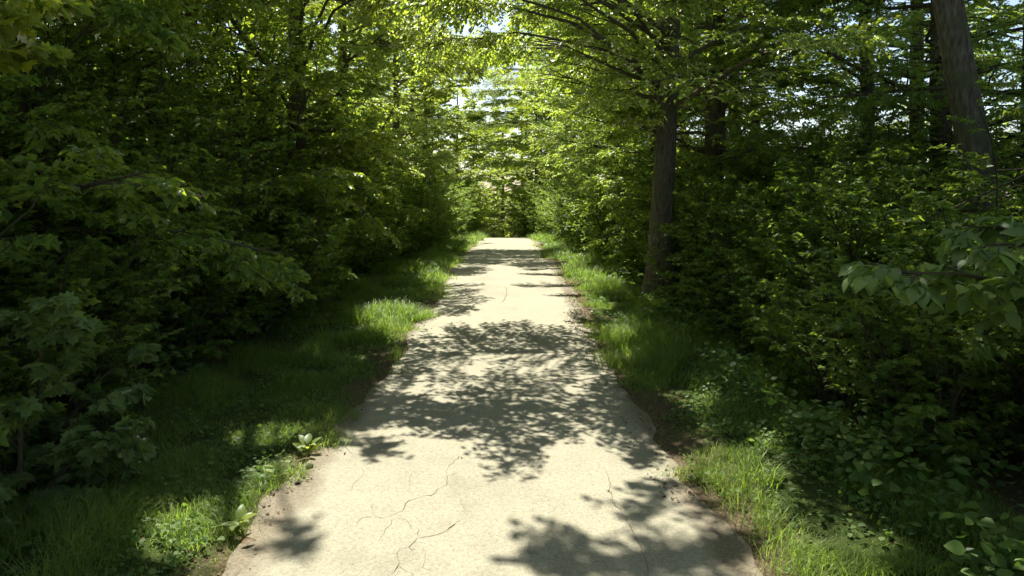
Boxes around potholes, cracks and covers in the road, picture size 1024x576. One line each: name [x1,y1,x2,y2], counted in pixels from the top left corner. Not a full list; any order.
crack [357,457,465,575]
crack [603,467,664,575]
